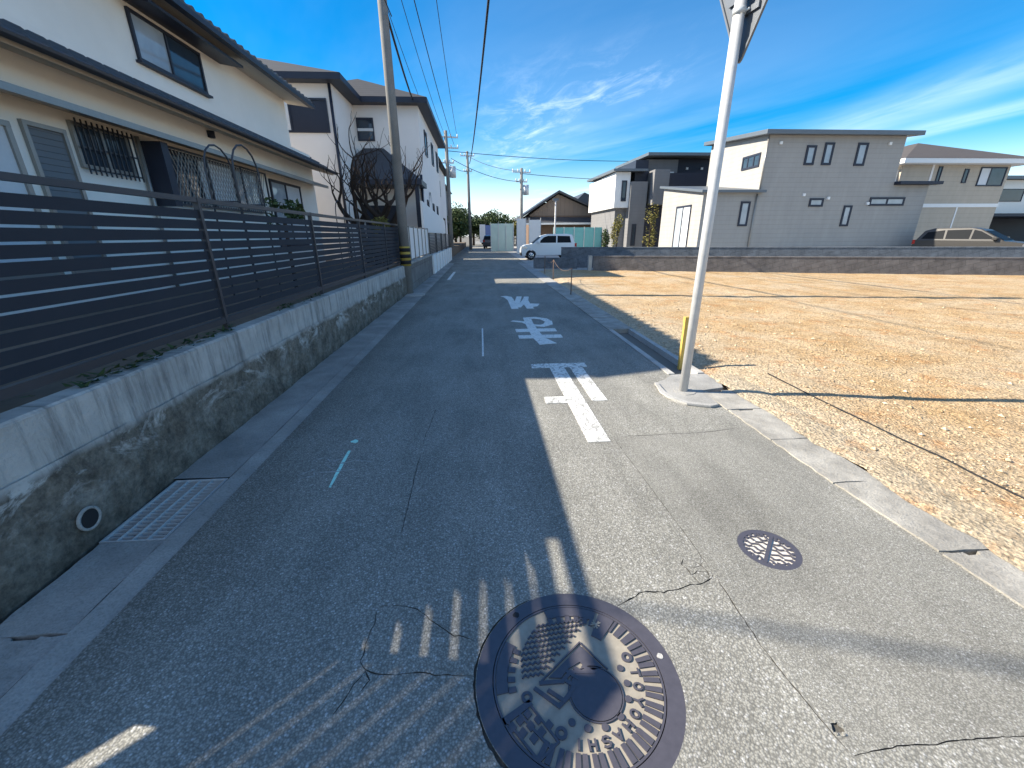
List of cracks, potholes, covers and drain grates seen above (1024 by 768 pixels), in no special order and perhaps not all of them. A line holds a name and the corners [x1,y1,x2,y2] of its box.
manhole cover [476,594,686,768]
crack [334,600,529,768]
pothole [831,721,846,736]
drain grate [99,478,228,544]
manhole cover [737,530,803,570]
crack [401,410,436,533]
crack [616,558,713,607]
